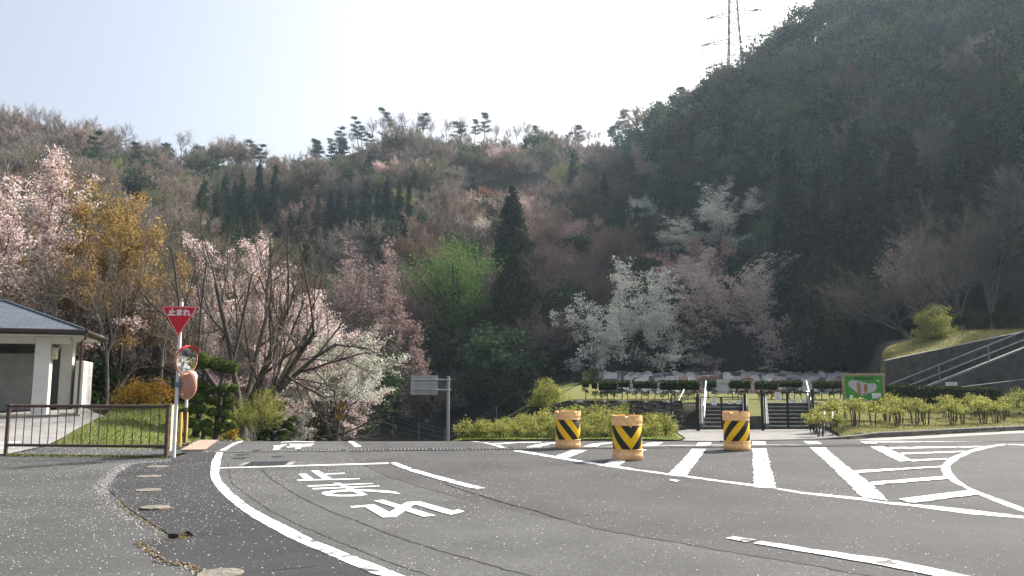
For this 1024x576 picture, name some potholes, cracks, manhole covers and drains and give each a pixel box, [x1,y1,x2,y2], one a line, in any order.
manhole cover [196,568,244,576]
